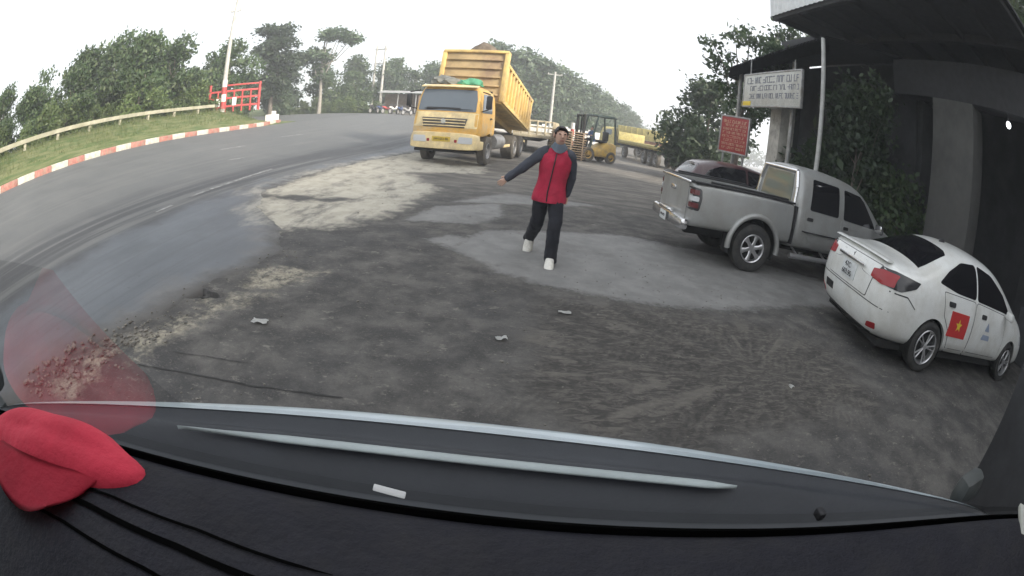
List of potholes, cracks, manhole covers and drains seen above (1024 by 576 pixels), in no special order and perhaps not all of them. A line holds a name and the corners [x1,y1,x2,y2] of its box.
pothole [198,288,221,299]
crack [138,351,343,398]
